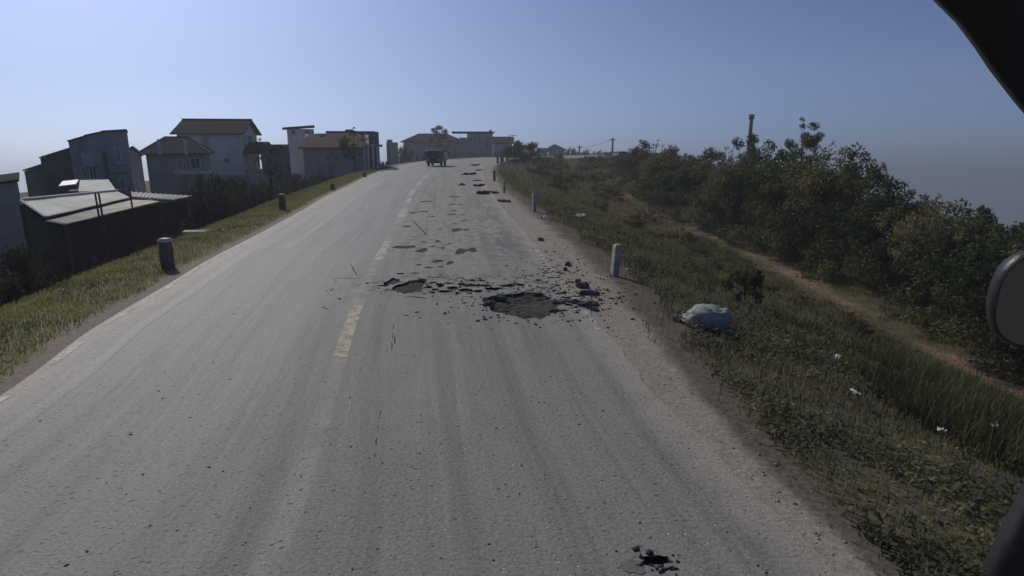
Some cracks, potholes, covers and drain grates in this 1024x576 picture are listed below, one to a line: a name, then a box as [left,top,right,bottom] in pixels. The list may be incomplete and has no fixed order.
pothole [482,292,559,320]
pothole [391,280,426,294]
pothole [640,555,673,568]
